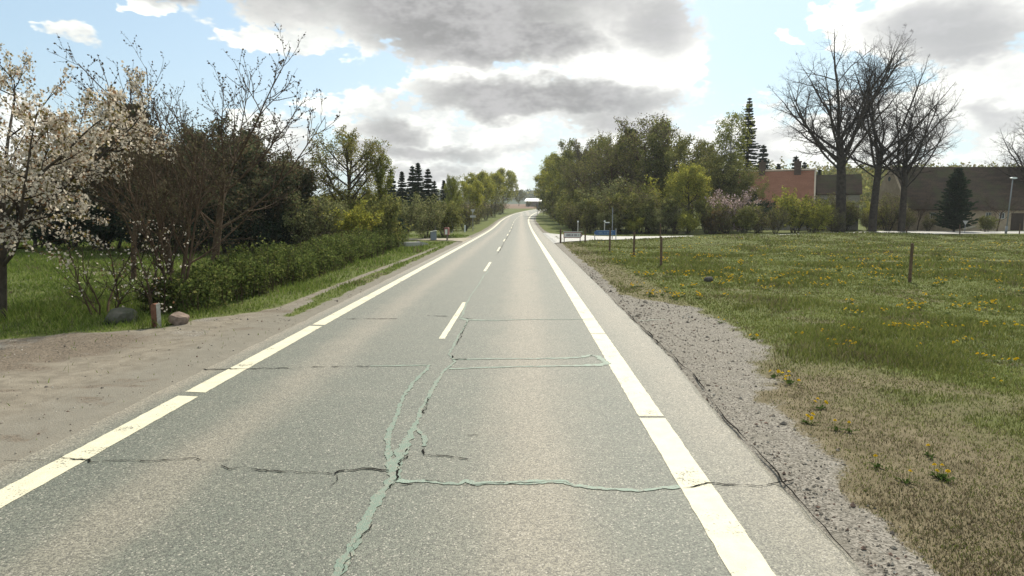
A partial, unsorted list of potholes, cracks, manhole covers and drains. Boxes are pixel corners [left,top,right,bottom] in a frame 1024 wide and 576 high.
crack [7,457,388,485]
